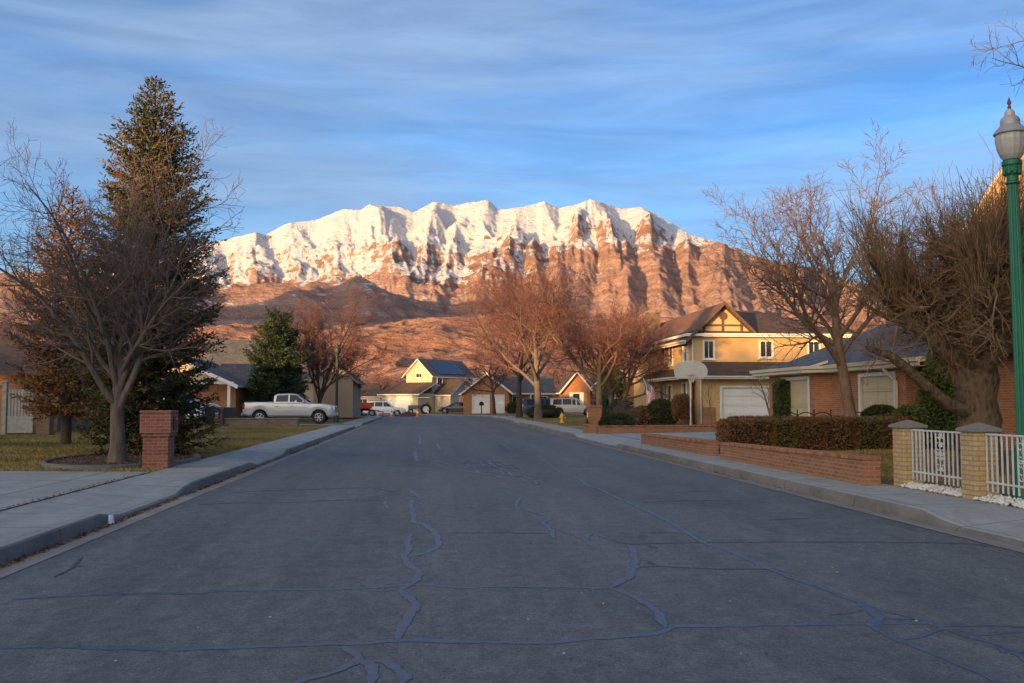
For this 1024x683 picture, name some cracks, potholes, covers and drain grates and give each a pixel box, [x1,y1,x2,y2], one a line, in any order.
crack [54,557,83,577]
crack [464,436,1024,683]
